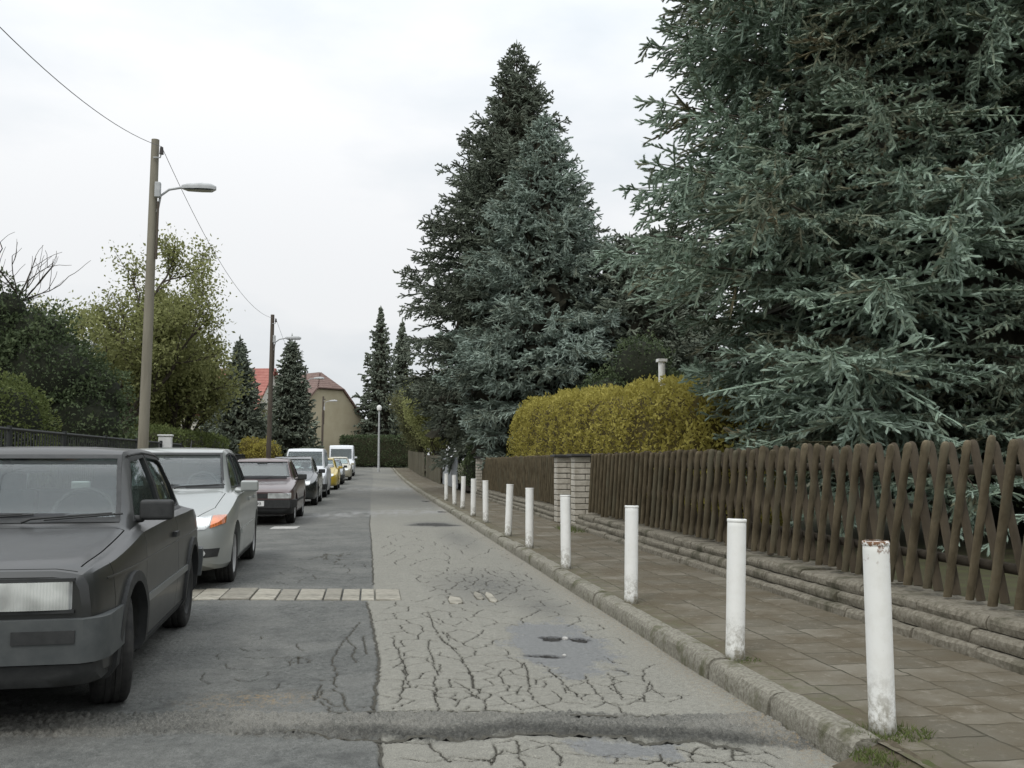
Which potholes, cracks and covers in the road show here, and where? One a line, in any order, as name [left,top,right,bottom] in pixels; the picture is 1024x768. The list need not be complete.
crack [200,532,779,768]
